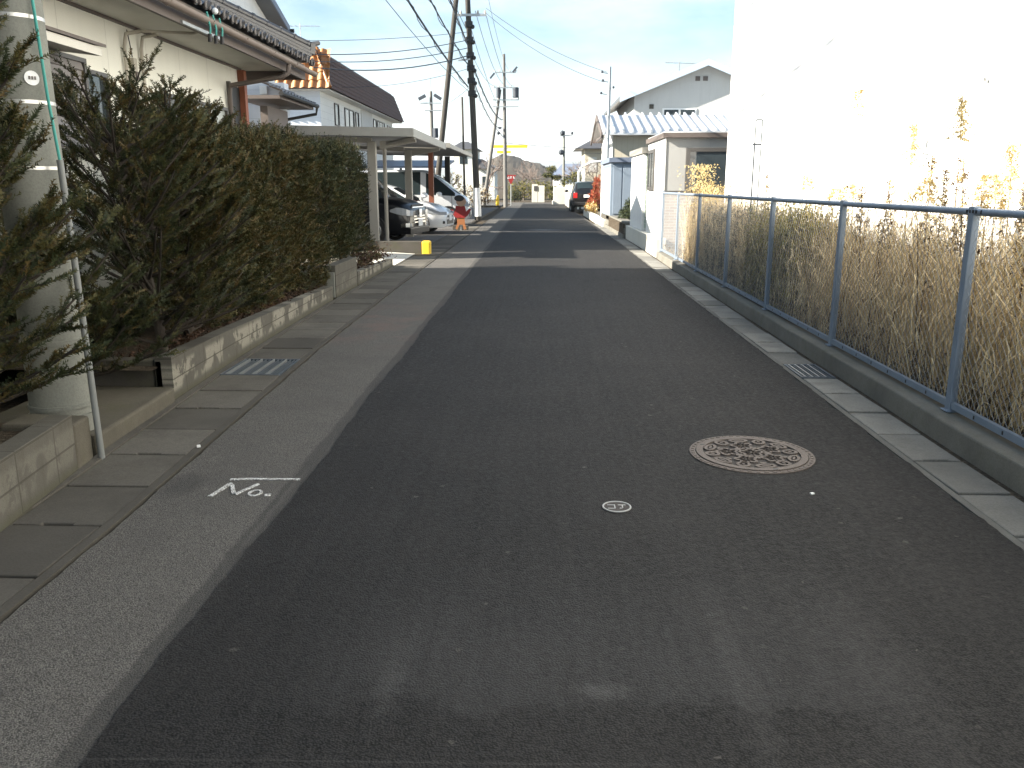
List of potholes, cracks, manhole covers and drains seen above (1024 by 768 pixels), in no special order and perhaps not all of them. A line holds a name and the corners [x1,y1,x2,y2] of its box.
manhole cover [602,501,631,513]
drain grate [219,359,300,376]
manhole cover [689,436,816,474]
drain grate [783,364,836,379]
